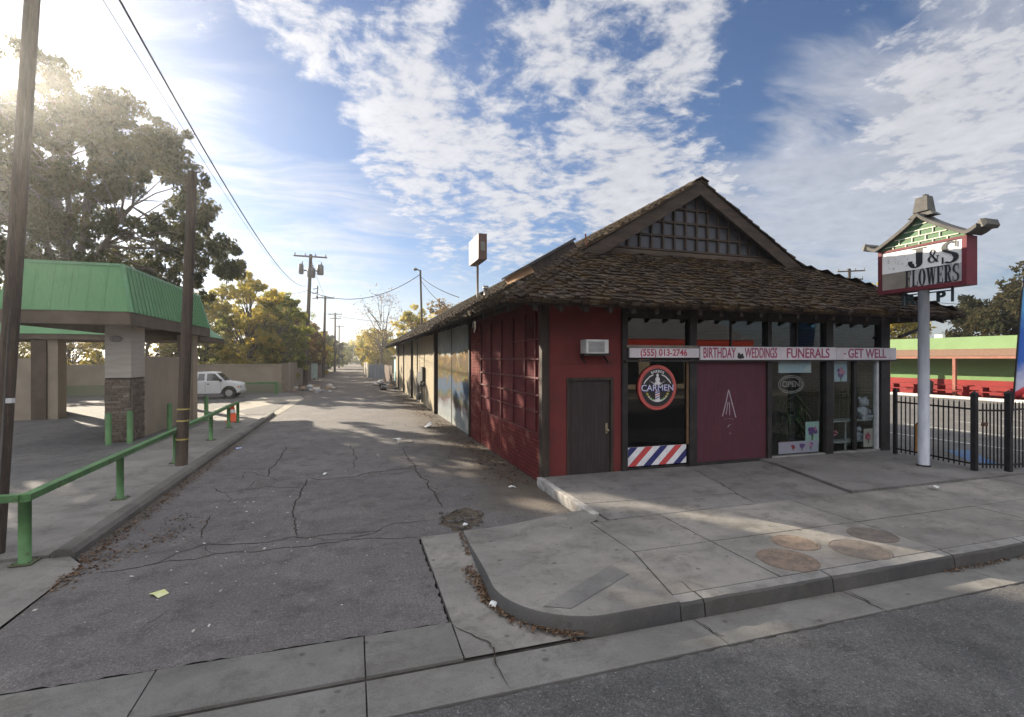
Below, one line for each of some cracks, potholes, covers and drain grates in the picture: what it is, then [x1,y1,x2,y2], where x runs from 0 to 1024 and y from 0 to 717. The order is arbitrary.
manhole cover [828,539,893,561]
crack [456,627,508,685]
manhole cover [756,548,821,572]
manhole cover [846,527,900,543]
crack [99,446,443,573]
pothole [439,508,484,532]
manhole cover [771,535,820,551]
